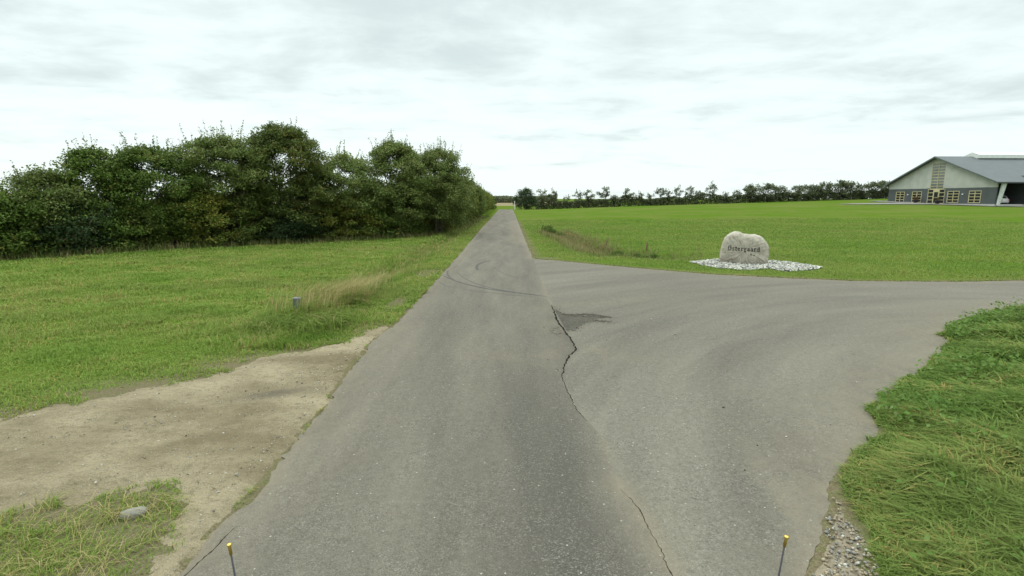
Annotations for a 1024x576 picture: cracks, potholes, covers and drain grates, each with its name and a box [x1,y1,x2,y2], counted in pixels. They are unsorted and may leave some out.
crack [184,528,234,576]
crack [620,488,673,576]
crack [551,306,585,419]
